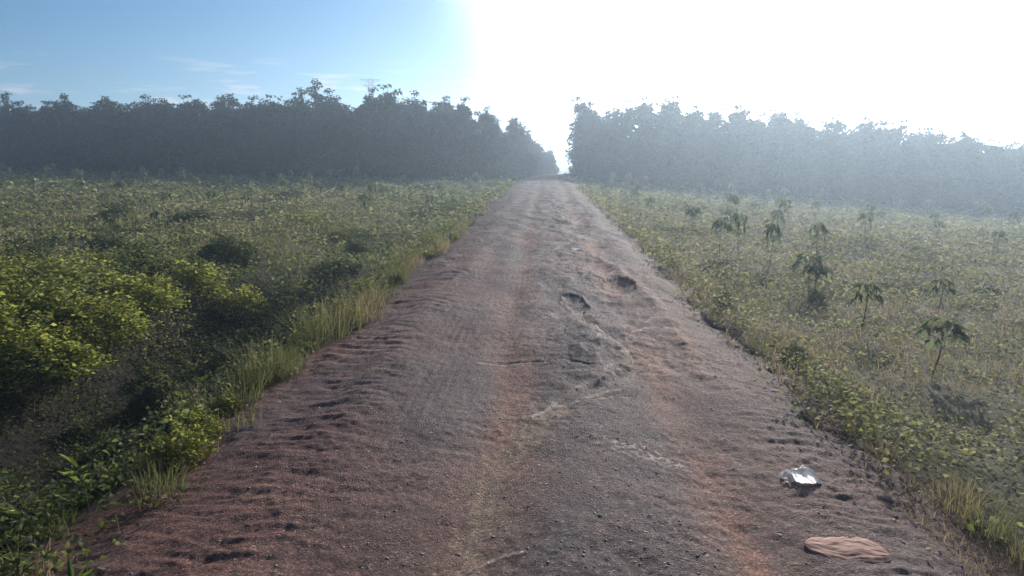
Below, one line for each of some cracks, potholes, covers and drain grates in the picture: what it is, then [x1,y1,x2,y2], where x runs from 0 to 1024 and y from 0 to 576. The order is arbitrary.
pothole [593,274,639,297]
pothole [559,291,593,316]
